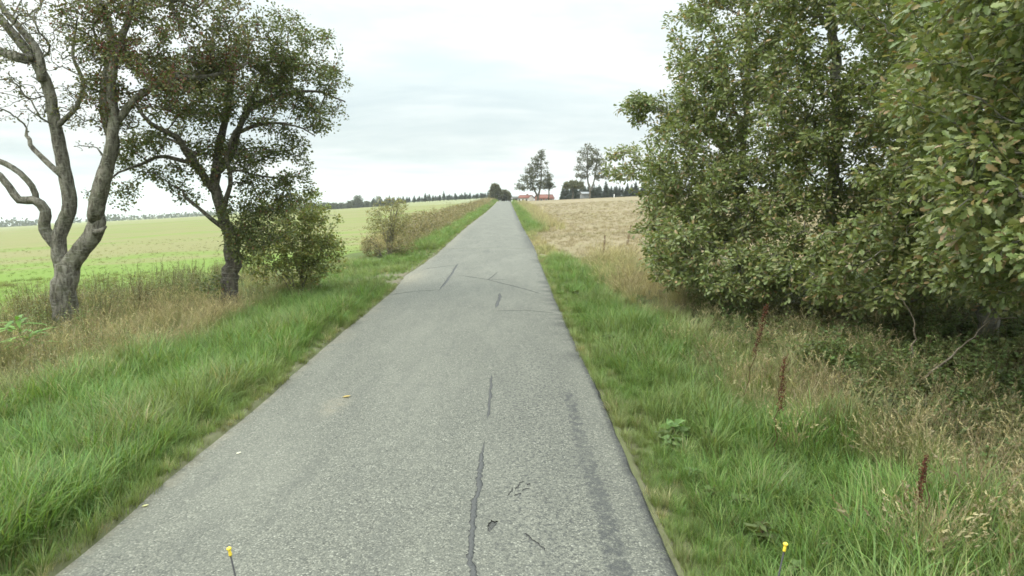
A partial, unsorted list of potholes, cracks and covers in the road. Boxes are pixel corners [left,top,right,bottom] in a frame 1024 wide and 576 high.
crack [398,264,551,313]
crack [466,375,493,576]
crack [525,533,545,551]
